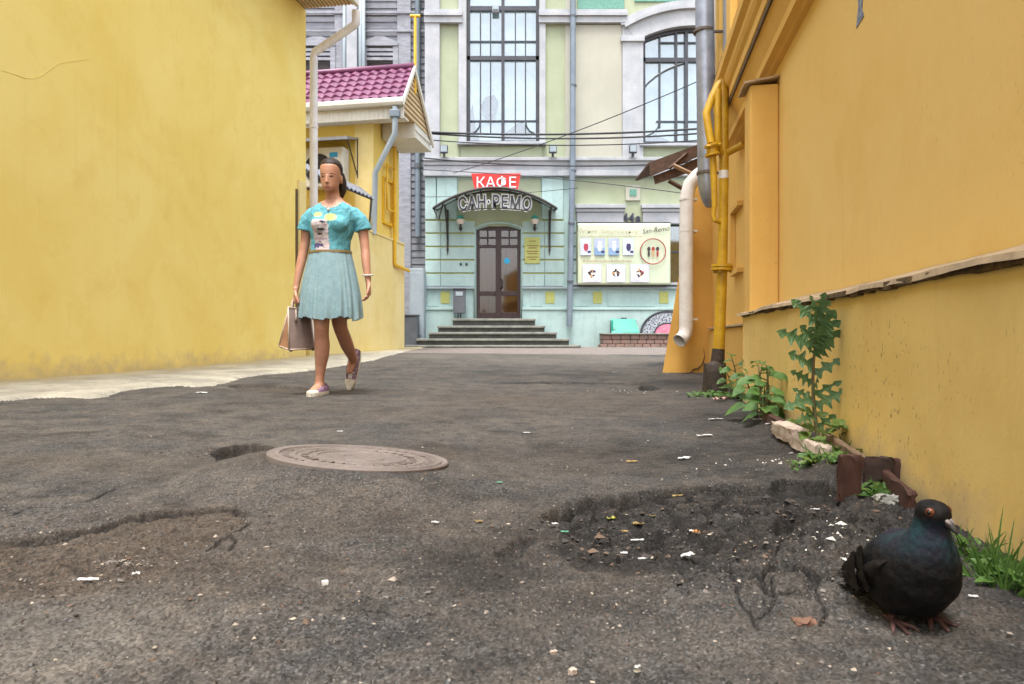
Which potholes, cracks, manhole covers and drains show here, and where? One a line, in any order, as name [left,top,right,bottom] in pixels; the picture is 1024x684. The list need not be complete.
pothole [770,479,834,507]
pothole [542,486,841,577]
manhole cover [266,444,448,474]
crack [207,523,251,552]
pothole [211,443,273,462]
crack [729,535,842,631]
